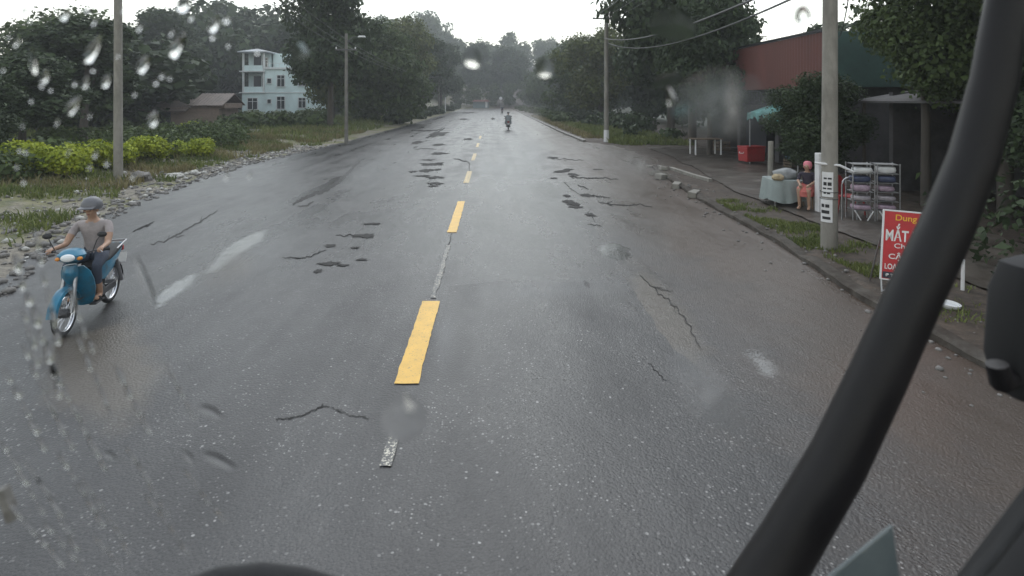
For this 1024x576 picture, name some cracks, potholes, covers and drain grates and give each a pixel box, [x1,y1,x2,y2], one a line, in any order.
crack [277,404,370,420]
